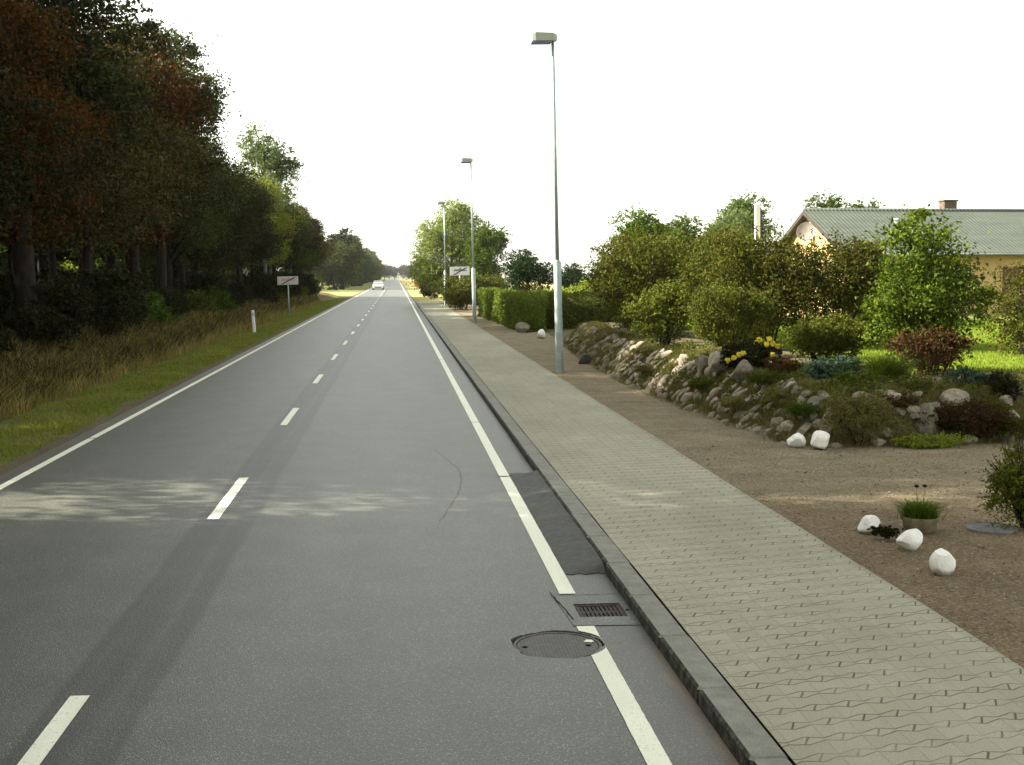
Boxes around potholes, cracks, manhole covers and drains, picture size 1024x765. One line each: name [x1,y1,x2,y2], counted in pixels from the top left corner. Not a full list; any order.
manhole cover [965,522,1018,535]
manhole cover [513,632,602,658]
drain grate [554,594,641,626]
